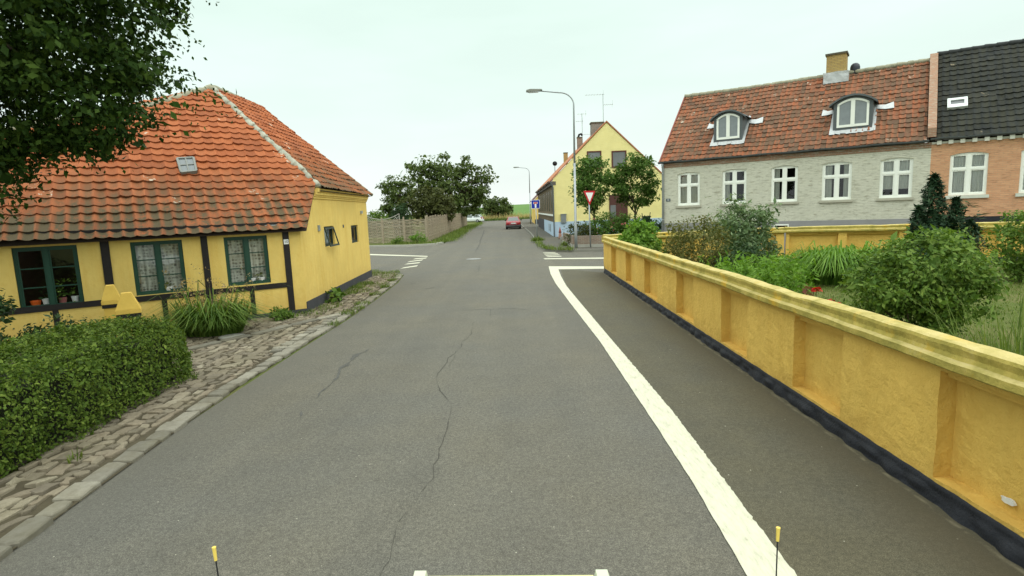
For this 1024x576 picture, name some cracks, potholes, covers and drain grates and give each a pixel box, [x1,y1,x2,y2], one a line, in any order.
crack [300,349,369,417]
crack [380,327,474,575]
